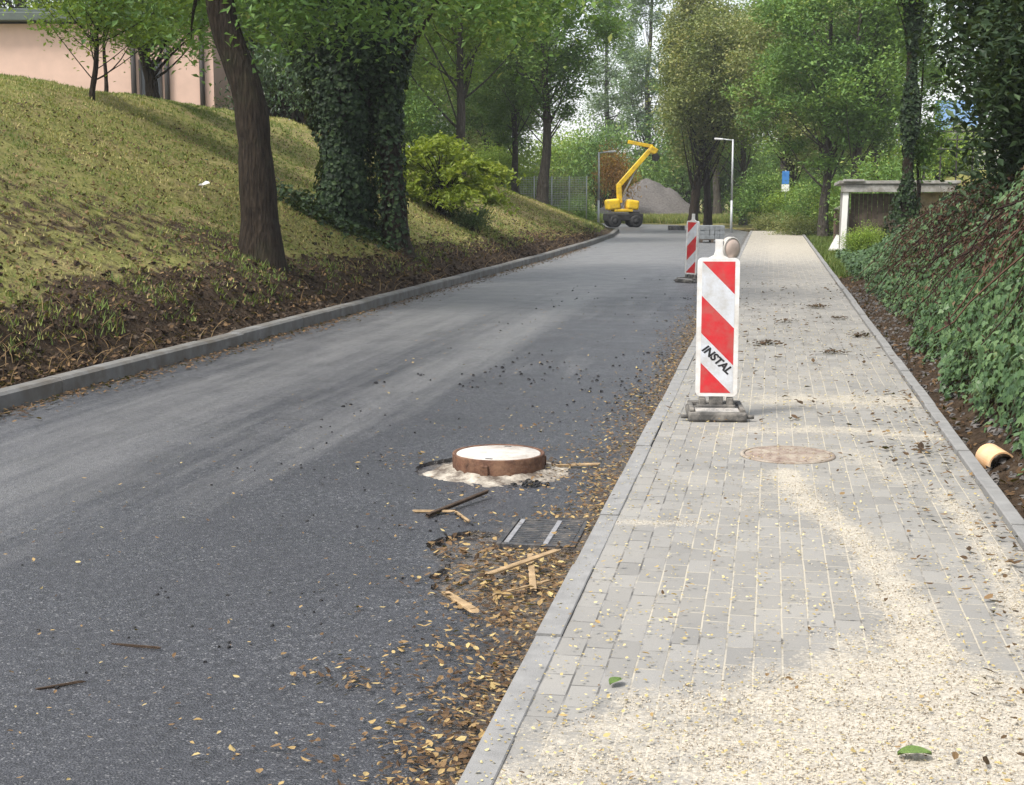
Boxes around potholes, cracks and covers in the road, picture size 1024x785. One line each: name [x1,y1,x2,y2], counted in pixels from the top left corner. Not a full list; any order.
manhole cover [423,444,570,487]
drain grate [496,518,589,552]
manhole cover [740,445,836,464]
